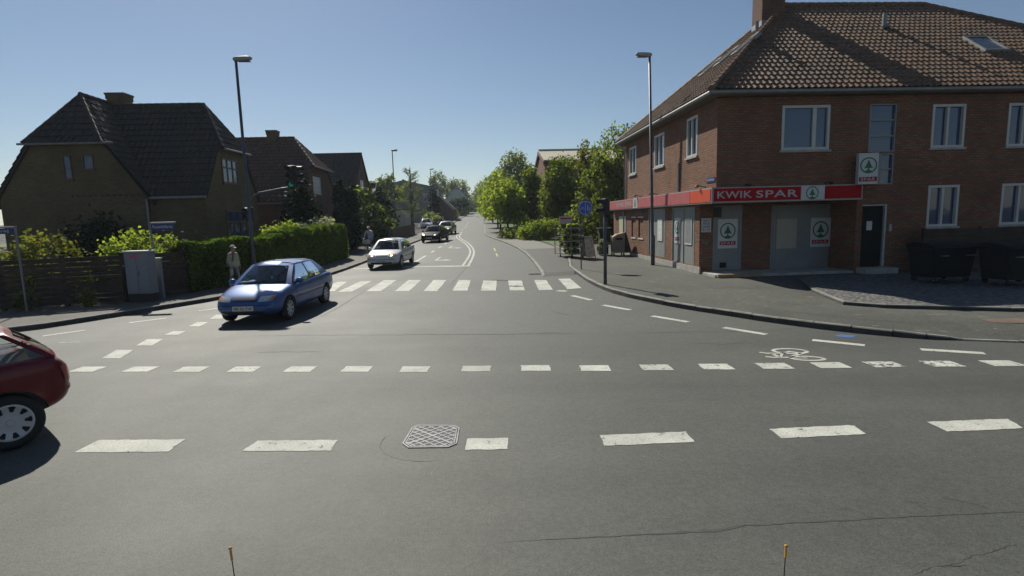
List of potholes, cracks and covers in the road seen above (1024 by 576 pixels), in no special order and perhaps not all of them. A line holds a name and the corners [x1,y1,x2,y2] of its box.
manhole cover [402,425,460,448]
crack [913,544,1016,575]
